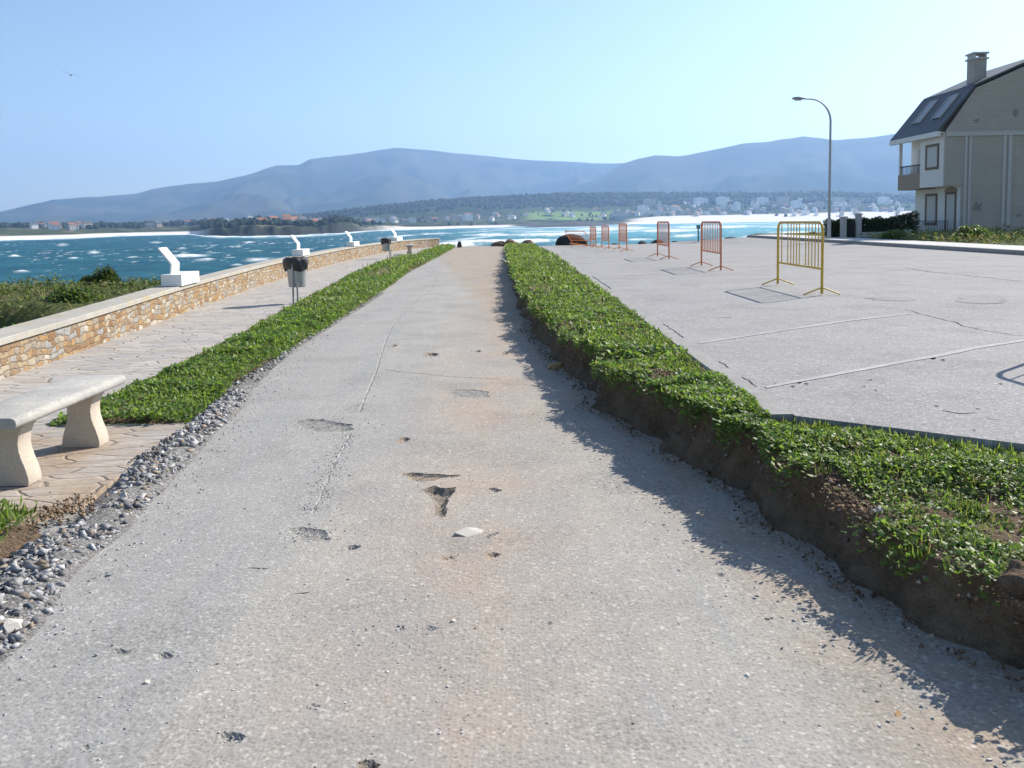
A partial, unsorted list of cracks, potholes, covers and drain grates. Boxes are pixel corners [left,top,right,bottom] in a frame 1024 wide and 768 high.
pothole [421,486,456,517]
pothole [215,731,246,744]
pothole [401,472,461,482]
crack [909,310,1023,336]
